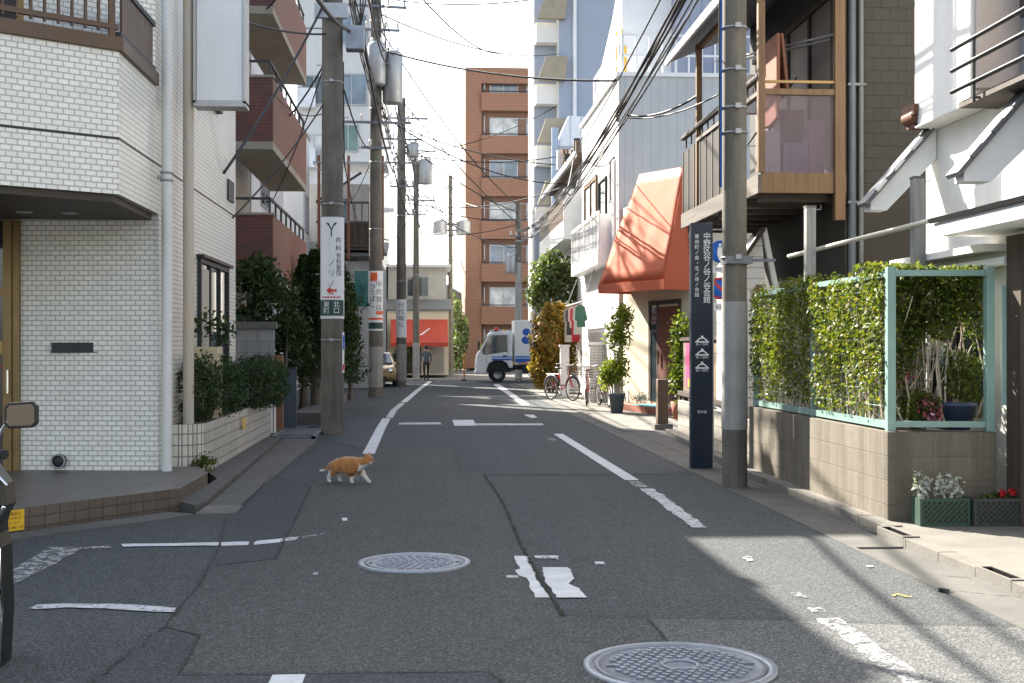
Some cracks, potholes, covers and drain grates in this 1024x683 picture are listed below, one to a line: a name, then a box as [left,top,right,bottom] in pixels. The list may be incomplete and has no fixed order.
manhole cover [583,642,778,683]
manhole cover [358,552,471,573]
